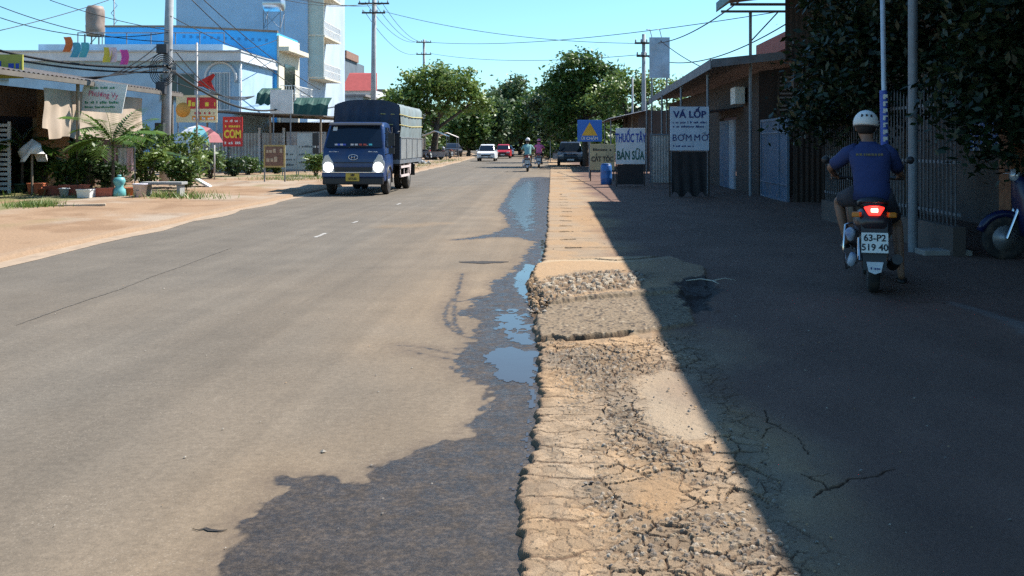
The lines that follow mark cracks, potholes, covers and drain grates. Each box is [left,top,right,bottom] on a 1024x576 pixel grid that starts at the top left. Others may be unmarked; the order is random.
crack [543,337,805,576]
pothole [675,274,725,312]
crack [803,469,891,498]
crack [518,386,618,576]
